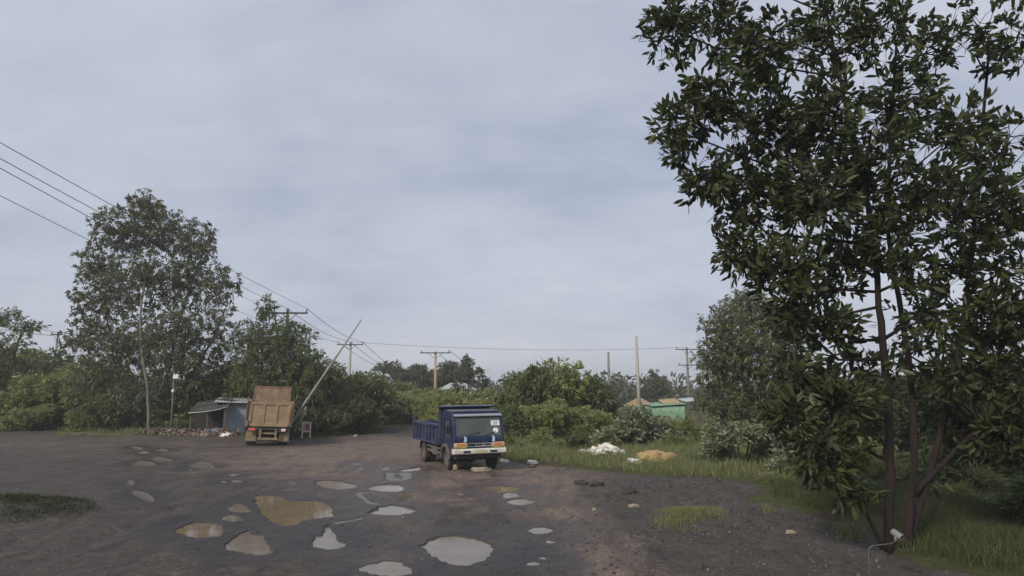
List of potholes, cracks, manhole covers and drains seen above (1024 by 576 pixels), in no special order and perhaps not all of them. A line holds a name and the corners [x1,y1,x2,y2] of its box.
pothole [172,521,226,538]
pothole [223,530,274,555]
pothole [311,524,348,549]
pothole [383,472,414,481]
pothole [418,535,496,566]
pothole [368,483,406,492]
pothole [358,560,413,576]
pothole [254,495,337,526]
pothole [365,504,419,515]
pothole [313,480,358,490]
pothole [227,504,252,513]
pothole [128,491,154,502]
